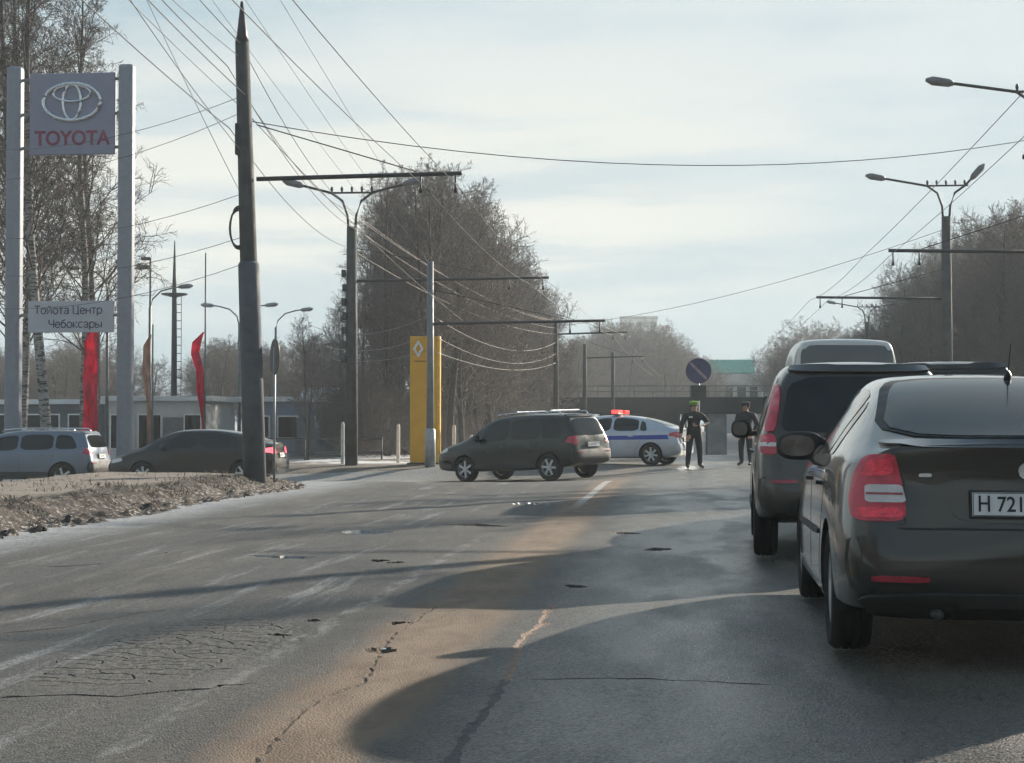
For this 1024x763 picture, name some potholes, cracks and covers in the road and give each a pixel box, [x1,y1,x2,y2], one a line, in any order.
crack [0,604,777,763]
